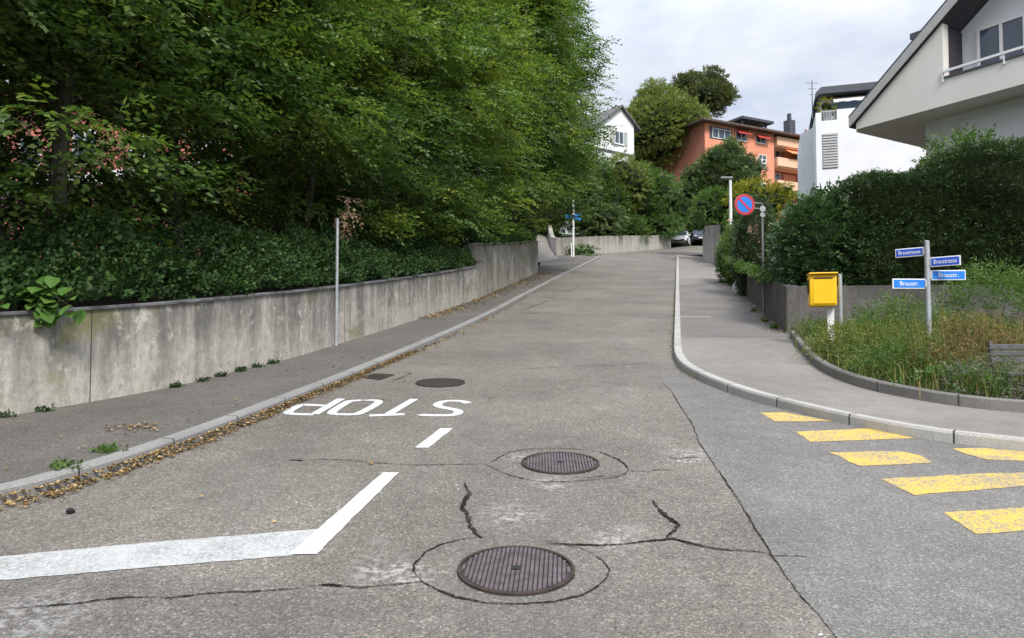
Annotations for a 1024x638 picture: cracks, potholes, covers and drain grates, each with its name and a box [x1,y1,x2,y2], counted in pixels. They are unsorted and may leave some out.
crack [292,448,699,482]
manhole cover [415,378,465,387]
manhole cover [521,452,600,474]
manhole cover [457,545,575,596]
crack [9,483,787,608]
